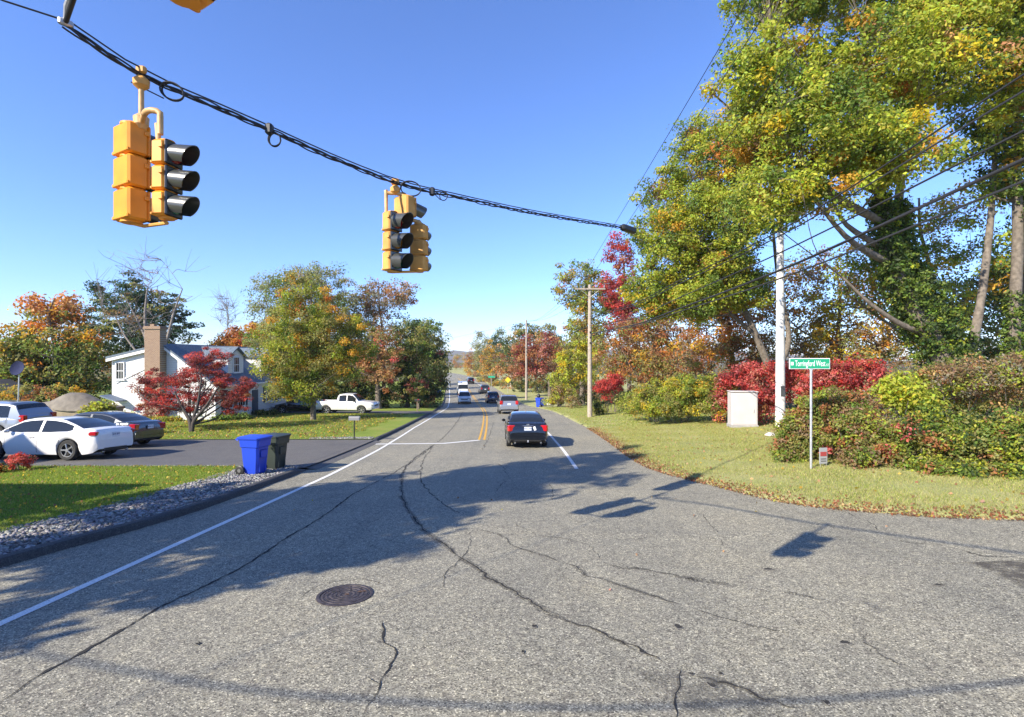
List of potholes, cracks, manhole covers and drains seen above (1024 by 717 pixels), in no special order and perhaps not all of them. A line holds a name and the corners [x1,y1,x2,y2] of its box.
crack [383,416,461,512]
crack [443,526,682,717]
crack [366,622,398,712]
manhole cover [316,584,374,607]
